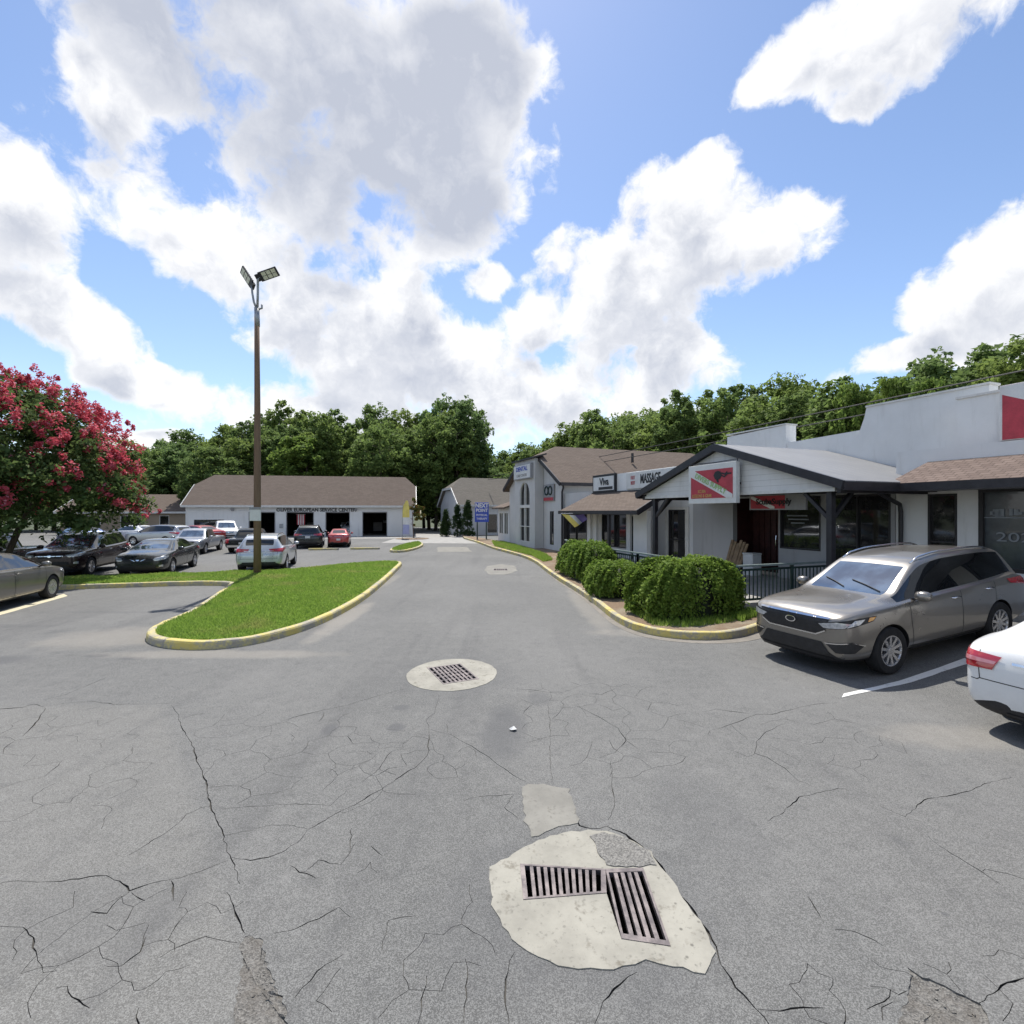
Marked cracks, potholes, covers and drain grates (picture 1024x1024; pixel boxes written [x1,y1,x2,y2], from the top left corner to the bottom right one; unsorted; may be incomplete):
drain grate [484,564,518,575]
drain grate [489,830,716,975]
crack [0,680,151,829]
crack [1,861,241,1024]
crack [179,690,521,1023]
crack [501,682,1024,1024]
drain grate [406,659,497,691]
